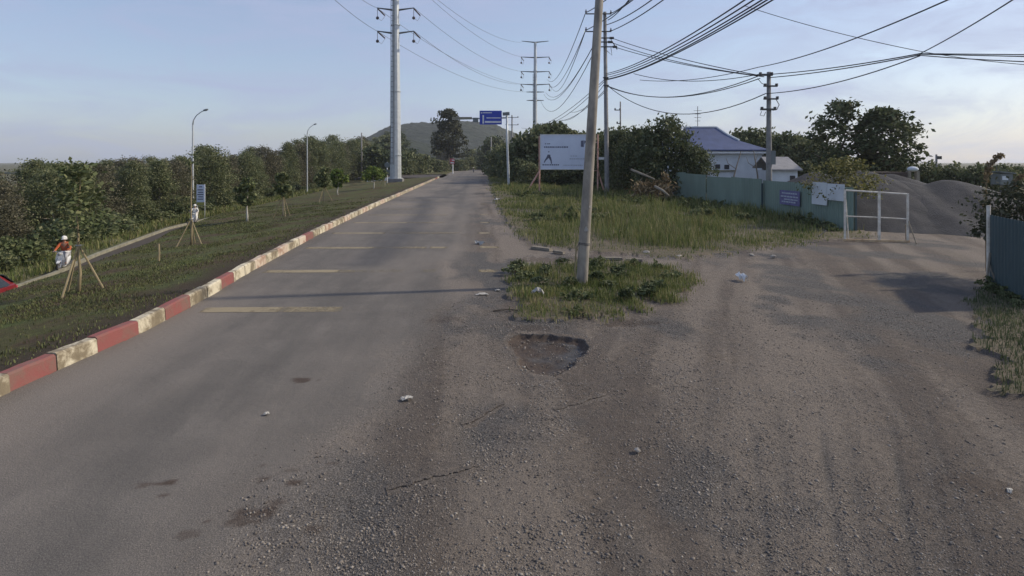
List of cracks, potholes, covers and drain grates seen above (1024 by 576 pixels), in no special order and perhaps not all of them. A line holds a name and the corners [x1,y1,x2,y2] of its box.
crack [552,393,610,412]
crack [460,402,507,429]
pothole [503,330,597,380]
crack [386,464,481,496]
